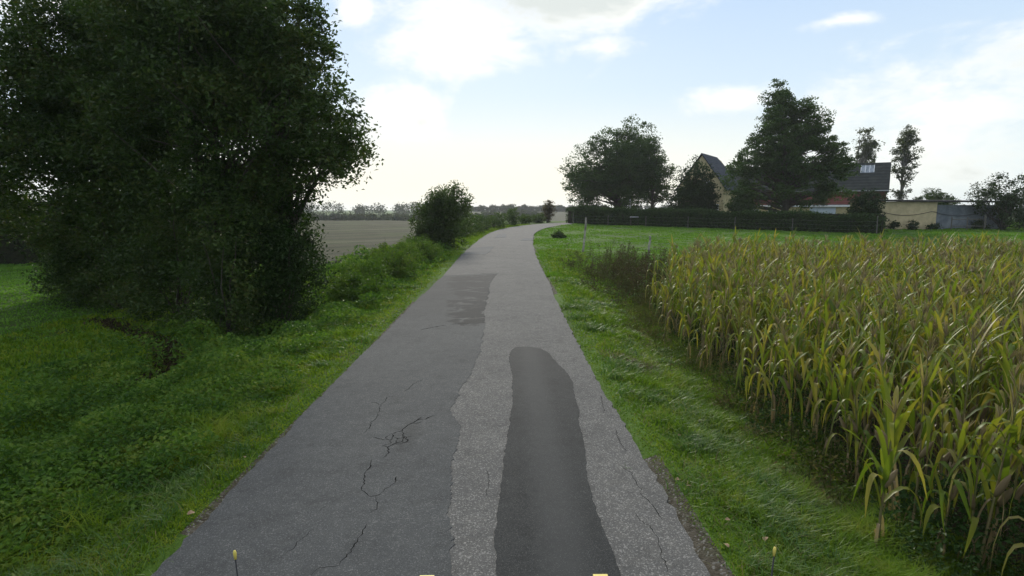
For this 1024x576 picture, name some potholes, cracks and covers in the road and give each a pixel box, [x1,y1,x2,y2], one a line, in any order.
crack [622,467,668,572]
crack [312,379,435,574]
